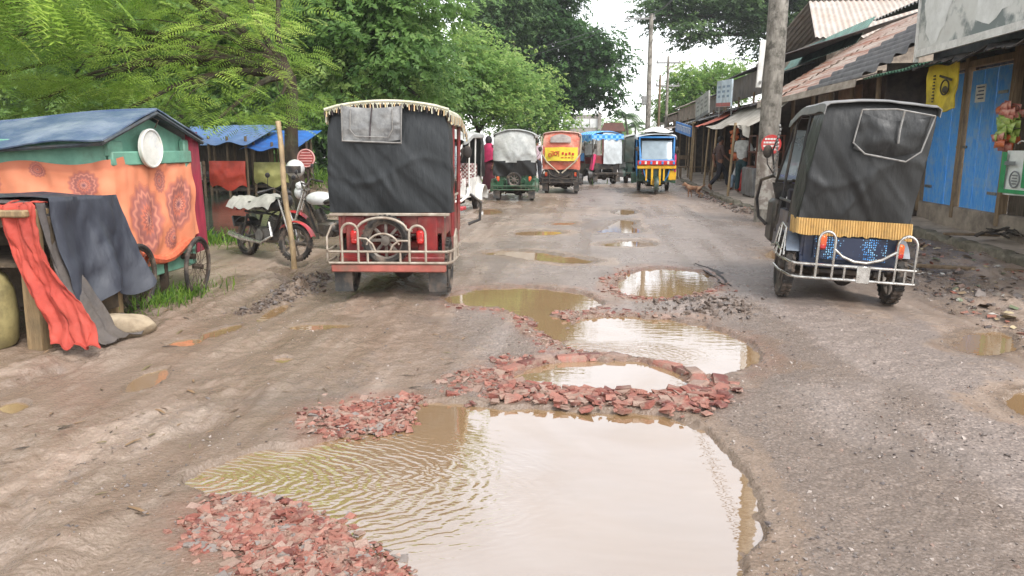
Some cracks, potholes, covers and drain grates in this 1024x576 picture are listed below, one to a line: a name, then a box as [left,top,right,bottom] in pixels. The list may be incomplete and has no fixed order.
pothole [179,396,771,576]
pothole [432,352,743,418]
pothole [597,218,646,233]
pothole [598,266,738,303]
pothole [948,327,1022,356]
pothole [1003,388,1024,415]
pothole [442,284,611,353]
pothole [532,308,765,374]
pothole [478,248,604,264]
pothole [598,239,658,247]
